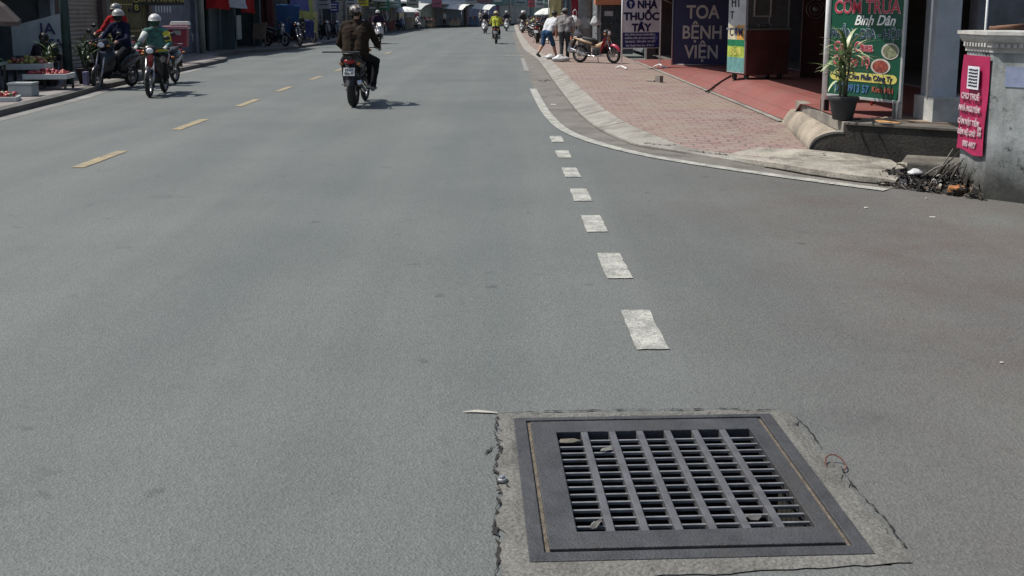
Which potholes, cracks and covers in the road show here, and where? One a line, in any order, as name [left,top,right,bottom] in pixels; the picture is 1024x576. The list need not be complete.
crack [485,408,777,576]
crack [794,417,907,548]
